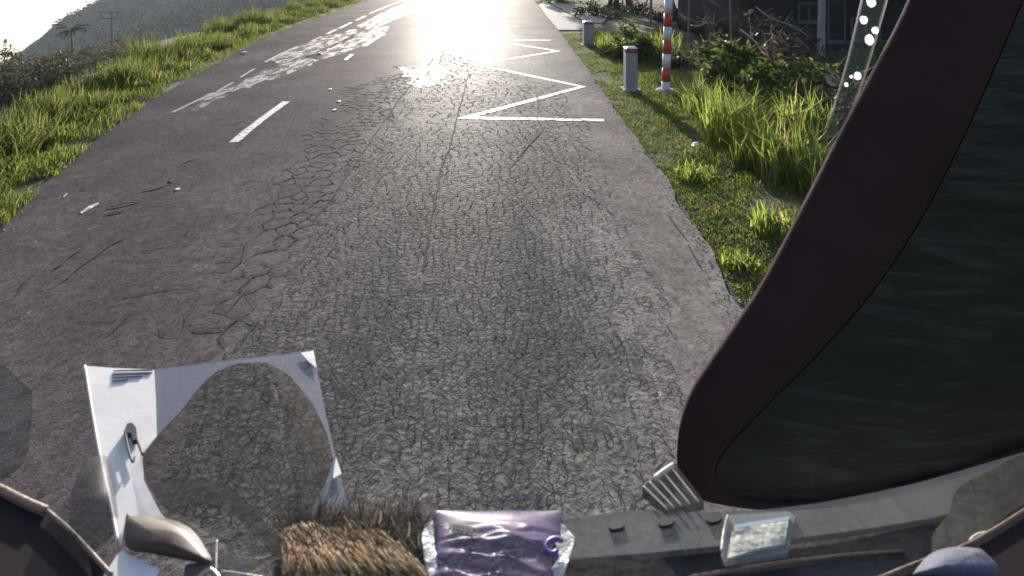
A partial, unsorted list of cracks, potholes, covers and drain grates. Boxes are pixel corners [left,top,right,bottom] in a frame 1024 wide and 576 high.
crack [55,56,436,349]
crack [168,48,685,518]
crack [667,214,701,268]
